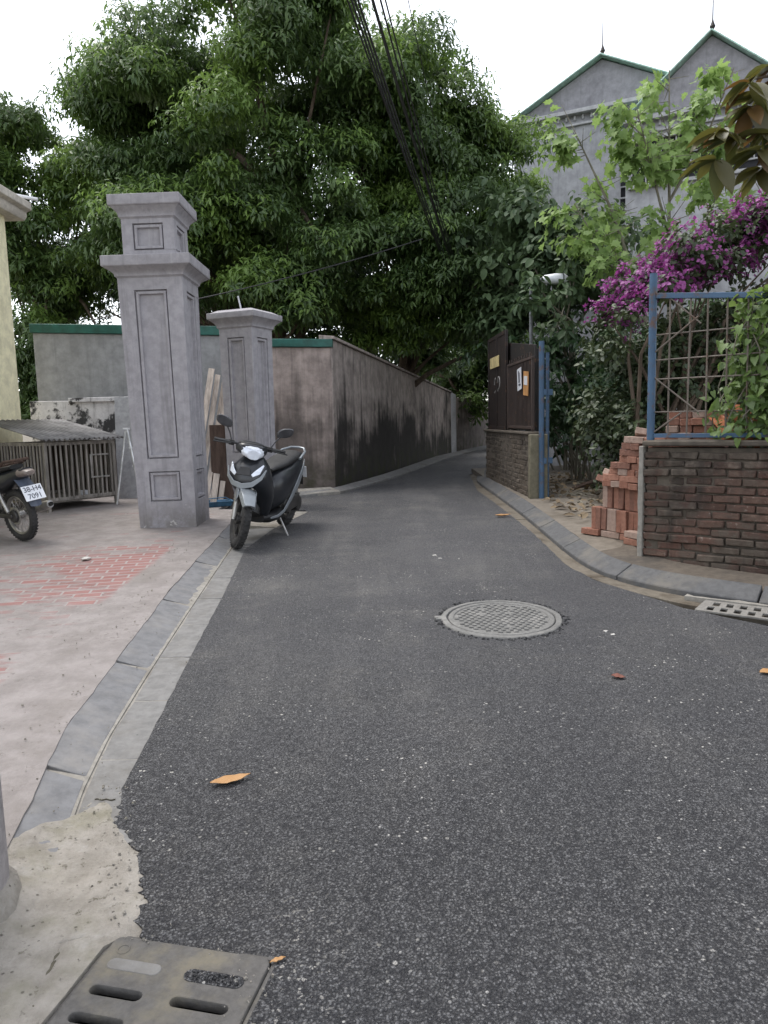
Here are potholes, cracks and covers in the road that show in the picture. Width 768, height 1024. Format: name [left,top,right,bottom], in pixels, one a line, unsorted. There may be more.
drain grate [684,594,768,626]
manhole cover [434,598,570,641]
drain grate [46,936,277,1024]
